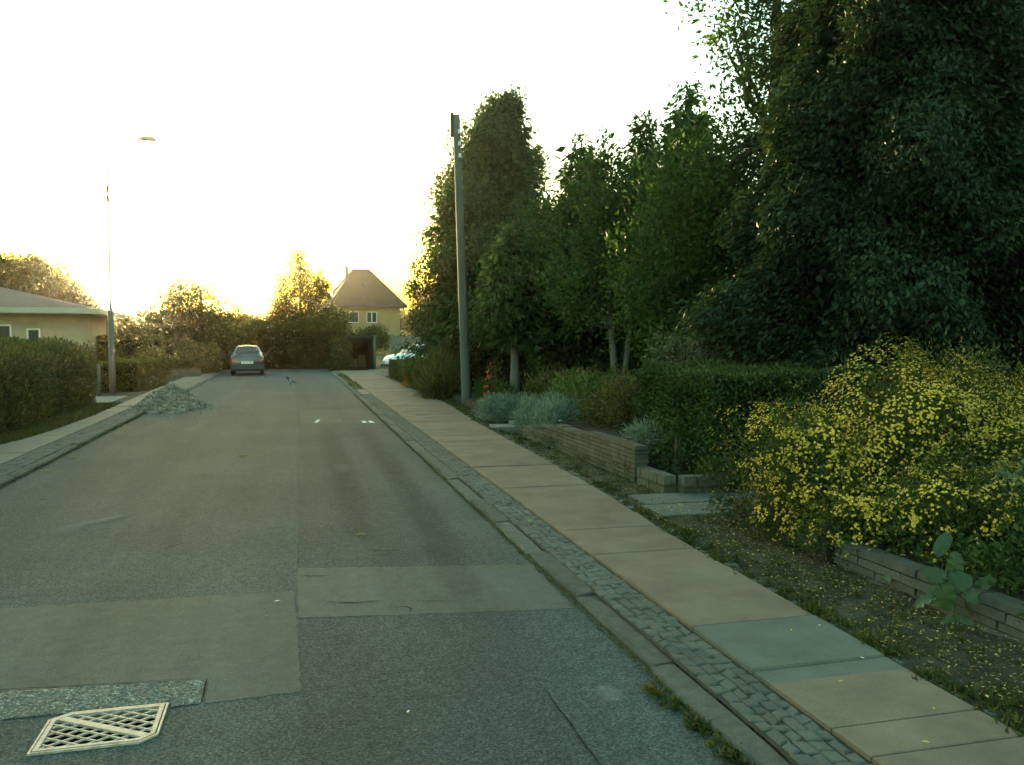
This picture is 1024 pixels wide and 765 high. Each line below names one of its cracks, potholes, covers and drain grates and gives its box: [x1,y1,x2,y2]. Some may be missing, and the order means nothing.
crack [535,679,601,765]
